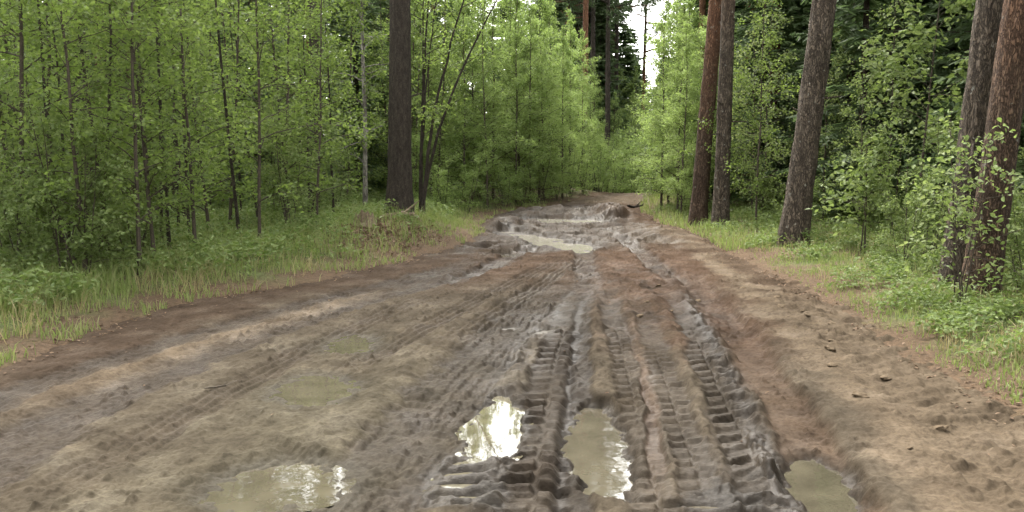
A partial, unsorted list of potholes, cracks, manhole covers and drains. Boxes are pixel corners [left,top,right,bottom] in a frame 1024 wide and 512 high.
pothole [767,447,882,512]
pothole [244,366,384,412]
pothole [481,220,615,254]
pothole [156,441,386,512]
pothole [550,393,649,505]
